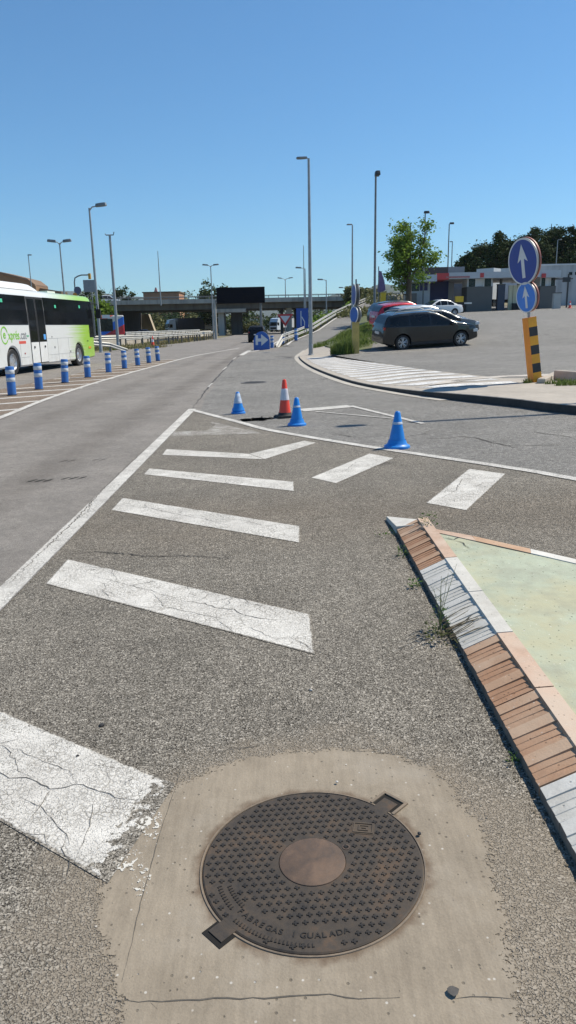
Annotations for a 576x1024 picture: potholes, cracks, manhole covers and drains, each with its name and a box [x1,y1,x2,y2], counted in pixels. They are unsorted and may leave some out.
crack [128,993,513,1002]
manhole cover [199,791,427,958]
crack [122,773,180,980]
crack [410,430,569,448]
